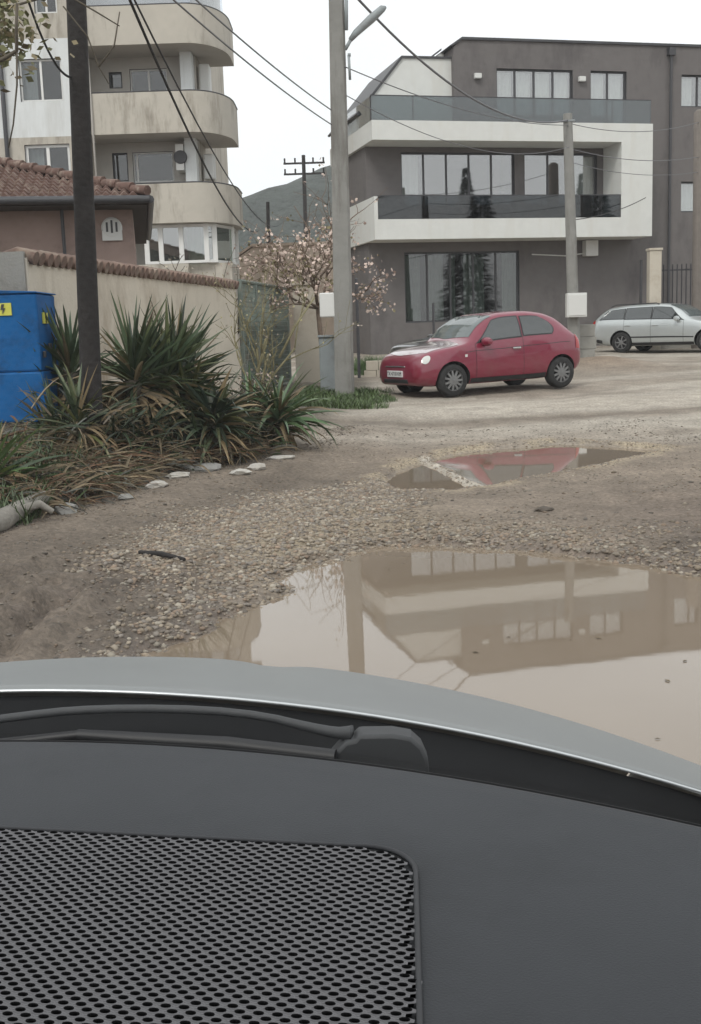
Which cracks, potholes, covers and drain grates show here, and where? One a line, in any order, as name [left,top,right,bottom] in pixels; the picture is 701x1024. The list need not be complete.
pothole [365,439,685,490]
pothole [84,530,701,776]
